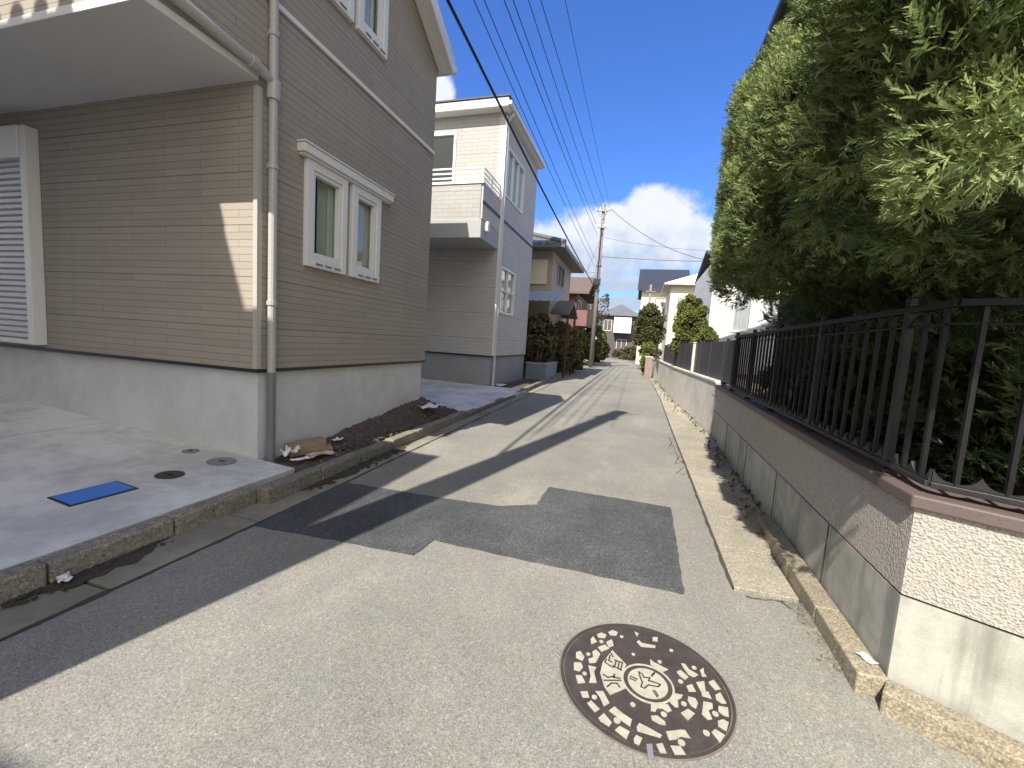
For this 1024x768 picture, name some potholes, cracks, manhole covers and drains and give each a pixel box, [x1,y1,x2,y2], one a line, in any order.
crack [746,595,790,609]
manhole cover [559,623,738,762]
